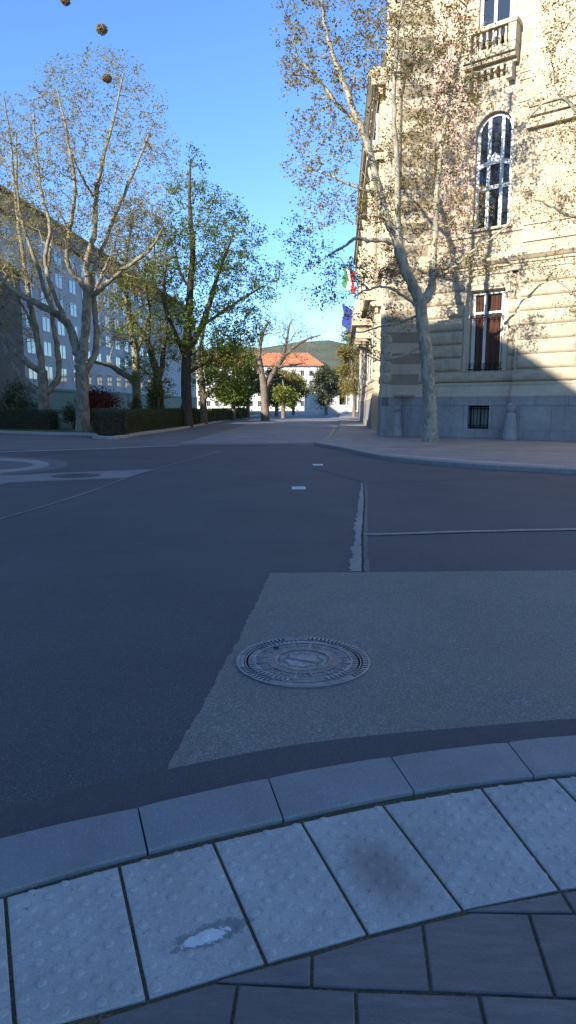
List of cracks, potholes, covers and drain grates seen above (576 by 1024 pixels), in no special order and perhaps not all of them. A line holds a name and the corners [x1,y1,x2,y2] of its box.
manhole cover [236,637,370,689]
